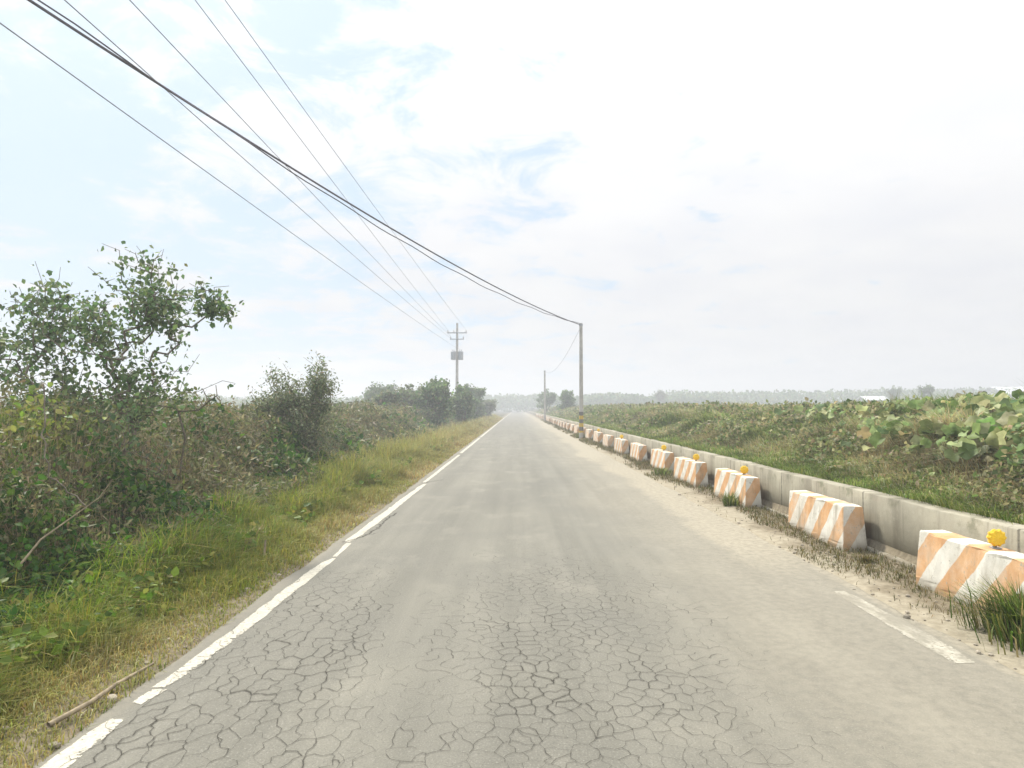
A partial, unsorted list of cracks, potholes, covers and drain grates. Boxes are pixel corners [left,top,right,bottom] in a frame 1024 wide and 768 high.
crack [60,568,401,768]
crack [338,548,898,768]
